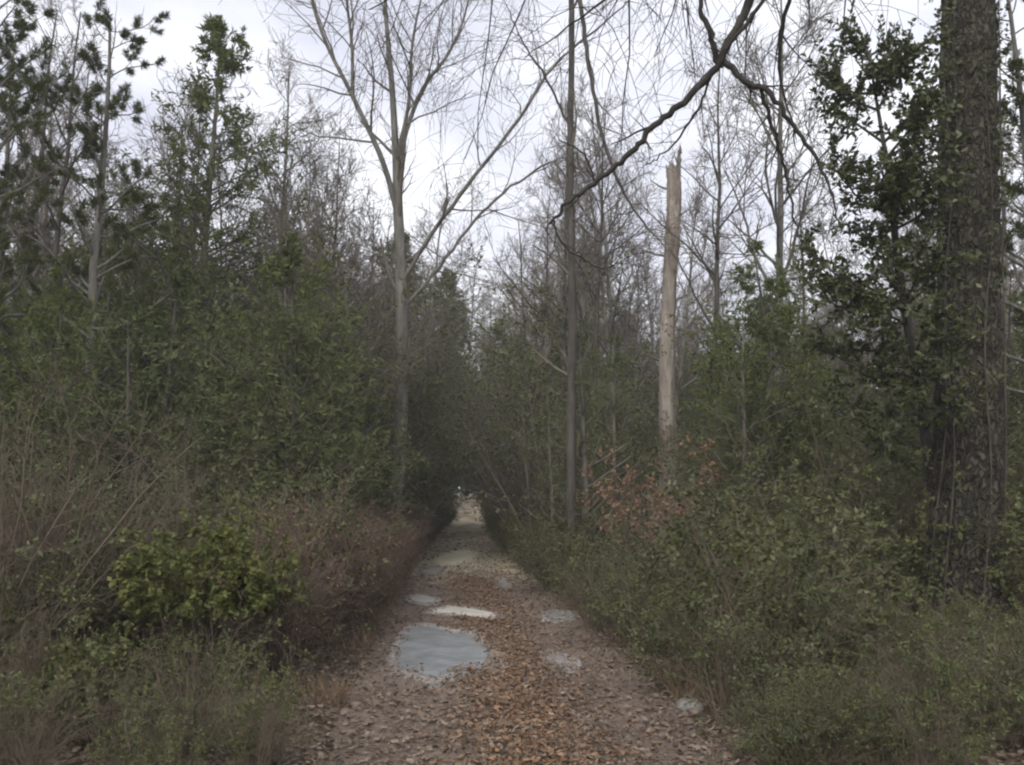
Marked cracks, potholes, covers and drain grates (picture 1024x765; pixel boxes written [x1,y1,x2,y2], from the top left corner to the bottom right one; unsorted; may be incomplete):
pothole [386,622,508,688]
pothole [539,649,582,674]
pothole [541,609,580,623]
pothole [425,605,506,620]
pothole [404,592,442,606]
pothole [415,566,448,577]
